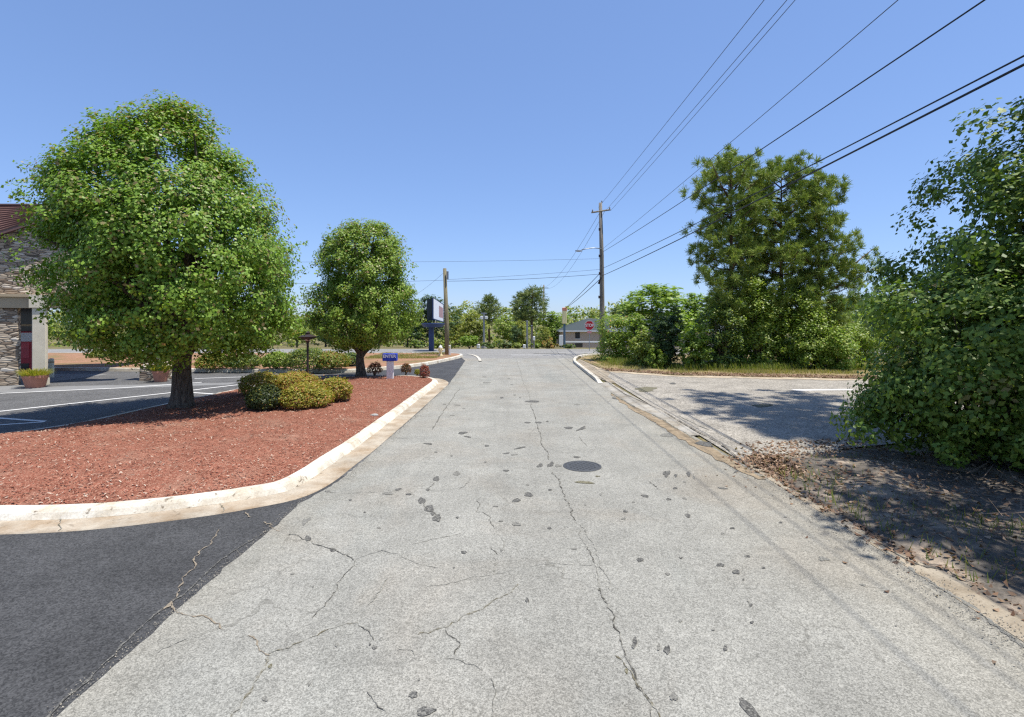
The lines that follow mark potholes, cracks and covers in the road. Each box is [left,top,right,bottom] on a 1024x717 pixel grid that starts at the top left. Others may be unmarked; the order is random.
crack [530,405,652,717]
pothole [739,697,760,717]
manhole cover [563,461,602,472]
crack [161,530,225,650]
crack [230,478,529,717]
